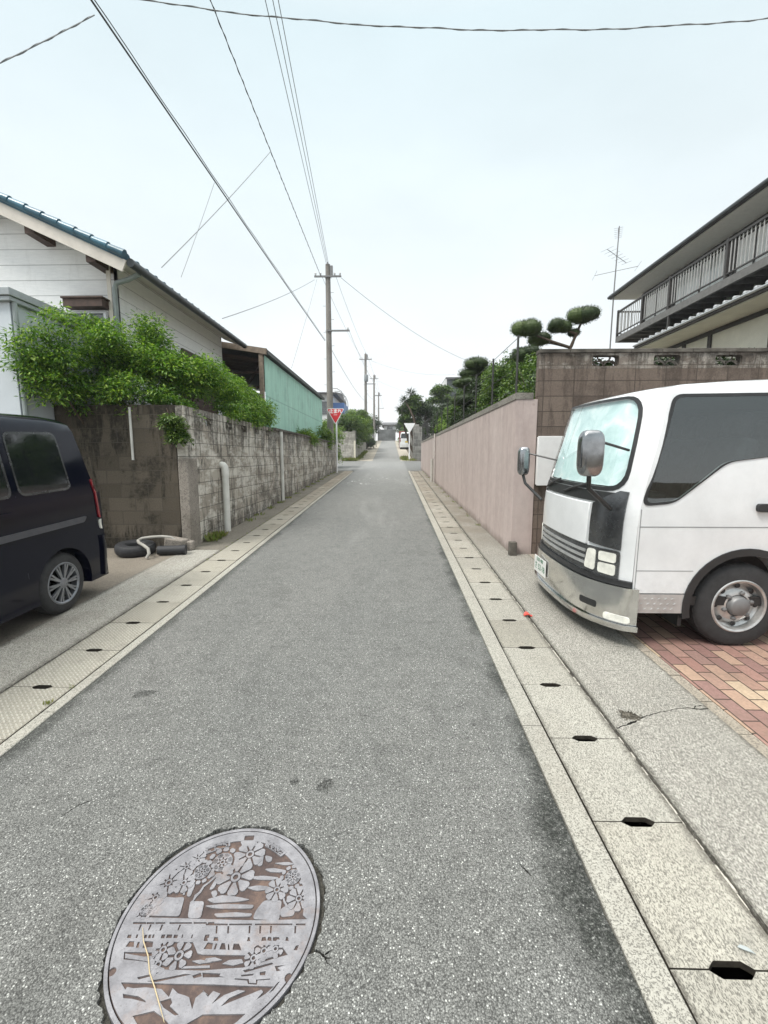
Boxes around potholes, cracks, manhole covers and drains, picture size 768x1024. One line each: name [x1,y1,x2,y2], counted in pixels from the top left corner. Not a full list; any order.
manhole cover [98,828,325,1024]
crack [617,705,707,729]
